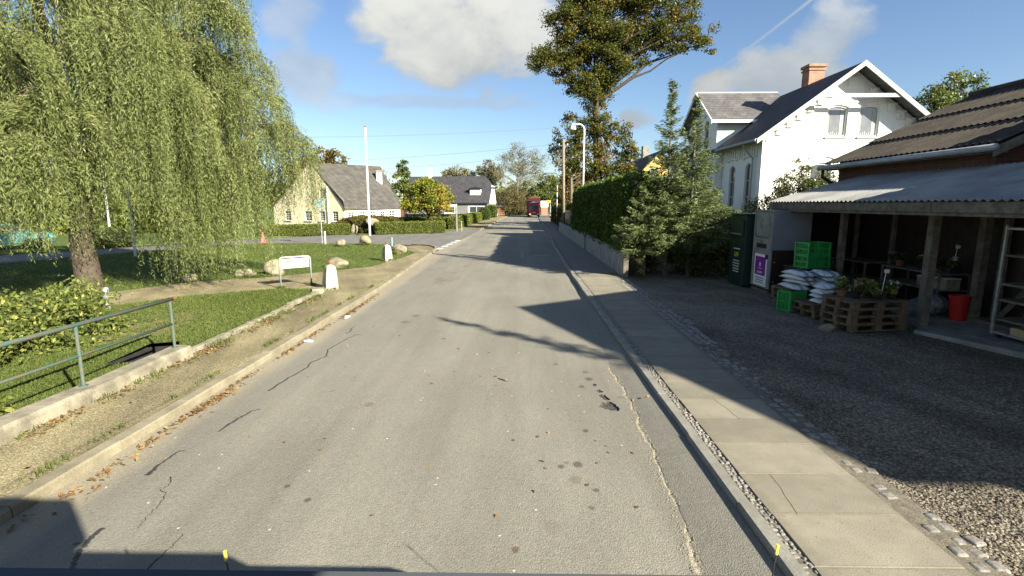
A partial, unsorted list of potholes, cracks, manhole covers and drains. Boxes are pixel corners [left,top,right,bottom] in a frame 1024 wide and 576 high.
crack [604,366,708,575]
pothole [599,401,620,411]
